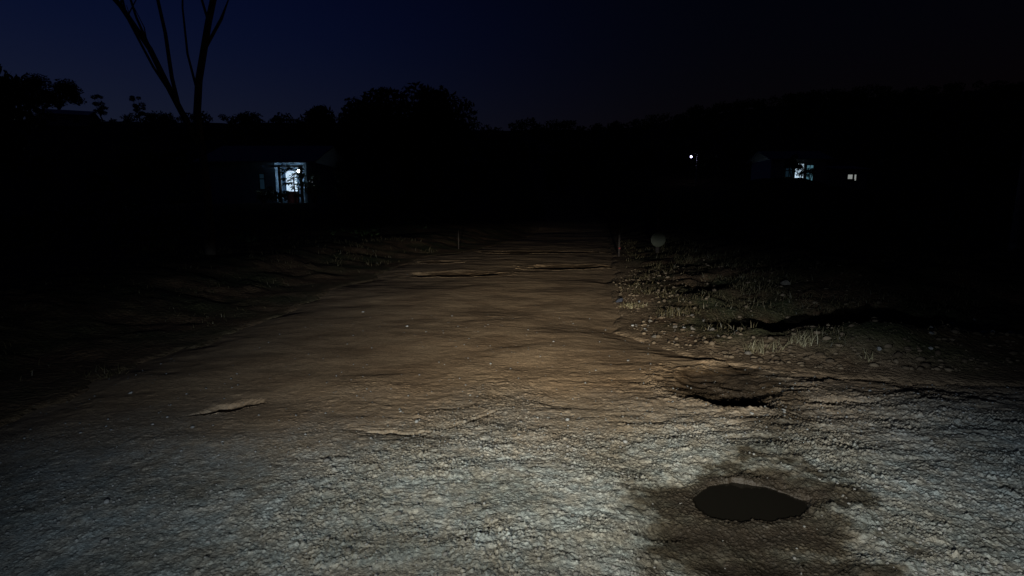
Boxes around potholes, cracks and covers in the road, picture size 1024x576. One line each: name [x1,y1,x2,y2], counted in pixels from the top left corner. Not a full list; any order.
pothole [645,360,817,417]
crack [795,393,892,405]
